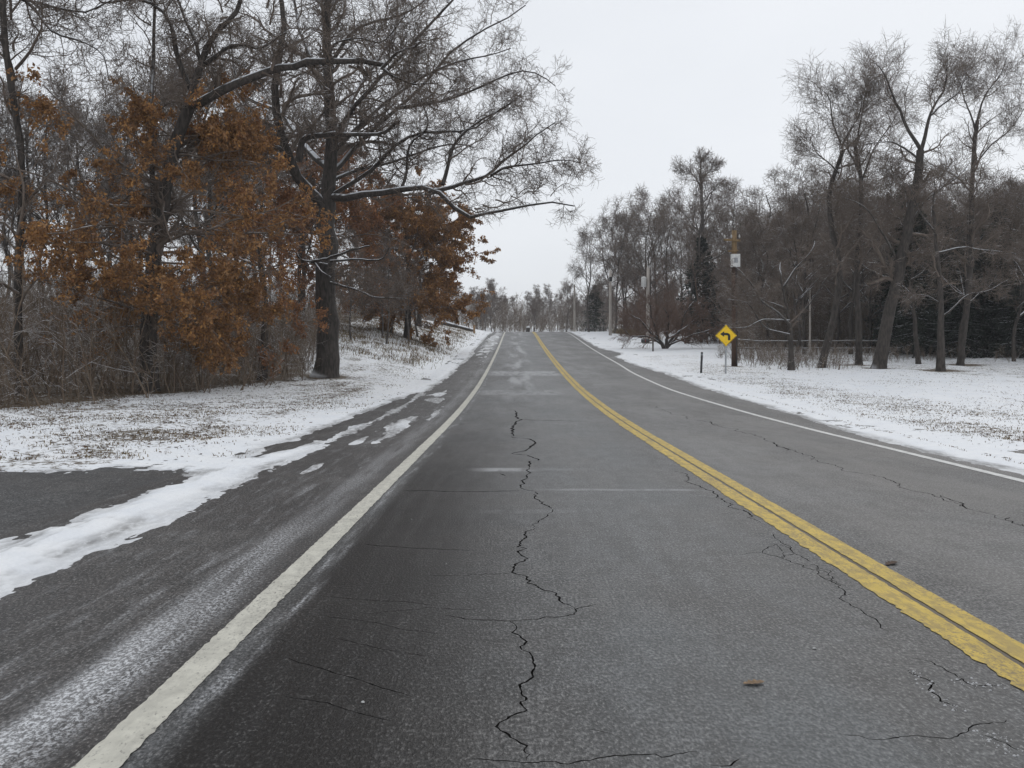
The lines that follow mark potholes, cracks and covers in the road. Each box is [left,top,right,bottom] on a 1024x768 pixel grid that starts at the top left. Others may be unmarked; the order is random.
crack [908,658,995,707]
crack [431,411,739,767]
crack [648,404,1023,526]
crack [835,721,1017,750]
crack [737,534,892,634]
crack [286,696,391,721]
crack [286,657,412,697]
